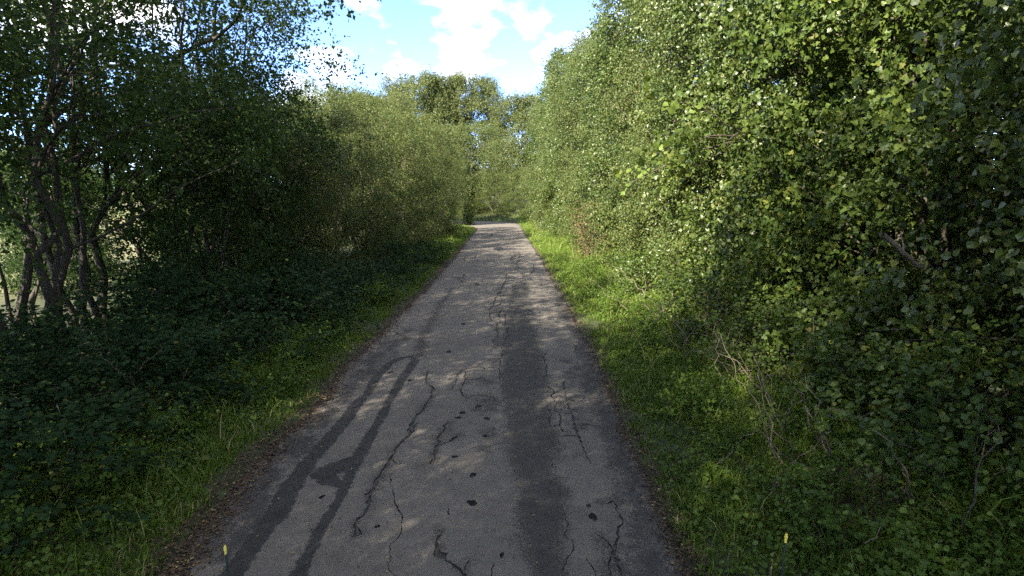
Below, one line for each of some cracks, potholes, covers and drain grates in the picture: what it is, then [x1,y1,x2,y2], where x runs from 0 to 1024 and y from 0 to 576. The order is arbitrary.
crack [450,252,535,402]
crack [562,500,623,576]
crack [352,371,469,576]
crack [543,344,591,463]
